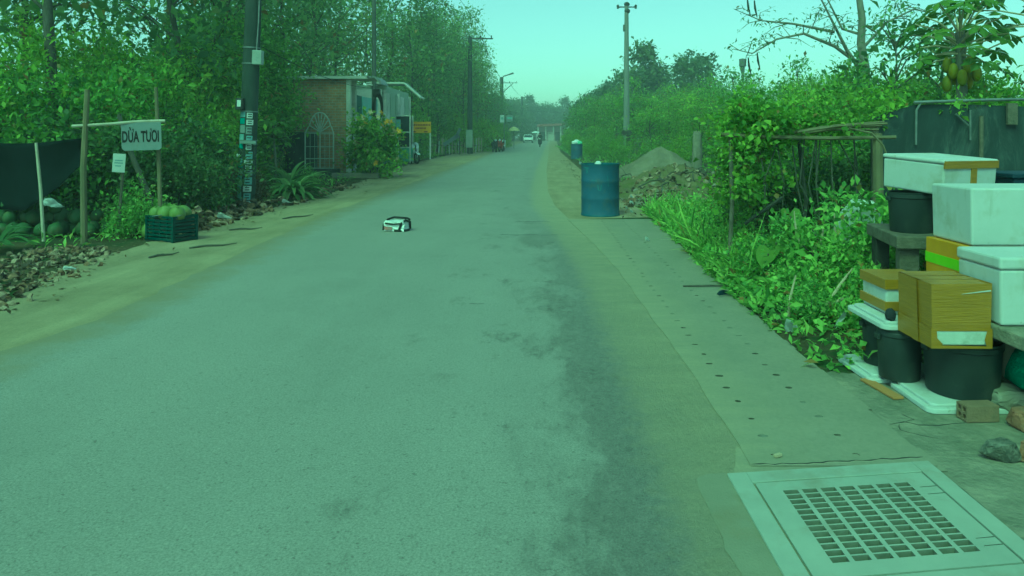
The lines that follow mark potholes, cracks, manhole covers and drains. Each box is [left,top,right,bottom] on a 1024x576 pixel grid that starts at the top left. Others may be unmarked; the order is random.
crack [890,414,967,439]
drain grate [727,461,1024,576]
